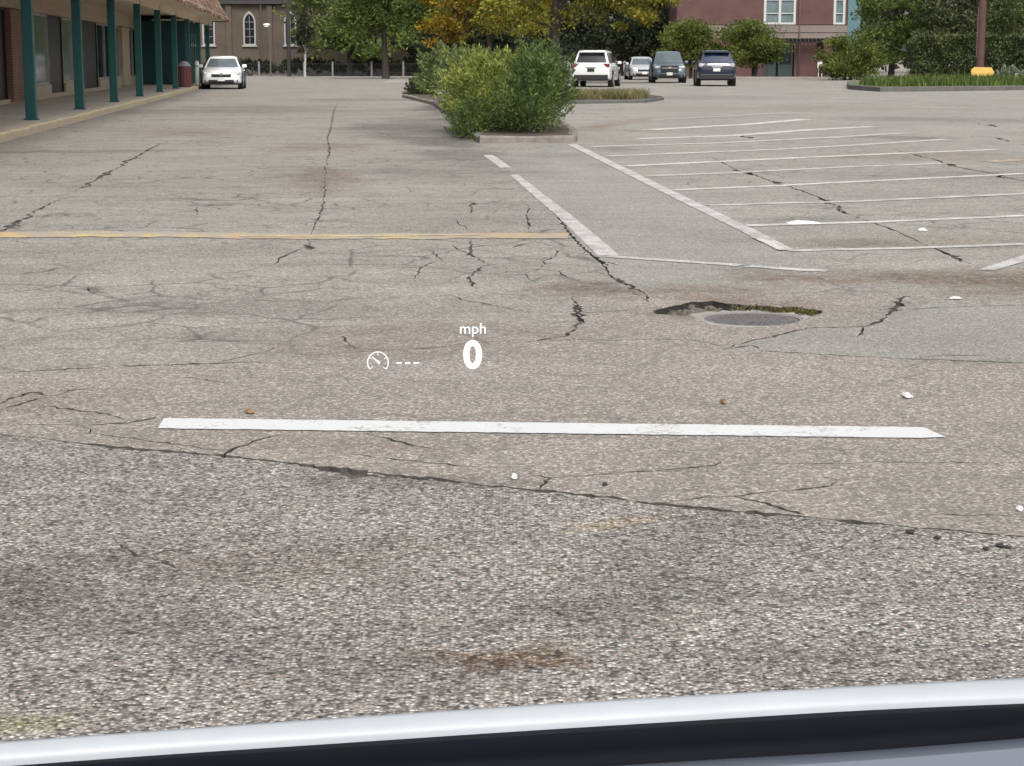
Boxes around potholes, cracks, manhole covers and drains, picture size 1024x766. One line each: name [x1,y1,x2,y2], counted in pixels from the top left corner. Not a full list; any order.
crack [273,106,336,265]
crack [727,296,1013,363]
manhole cover [689,310,811,327]
pothole [653,301,822,320]
crack [530,457,1013,515]
crack [414,201,649,342]
crack [345,434,498,468]
crack [295,336,496,358]
crack [895,149,1023,181]
